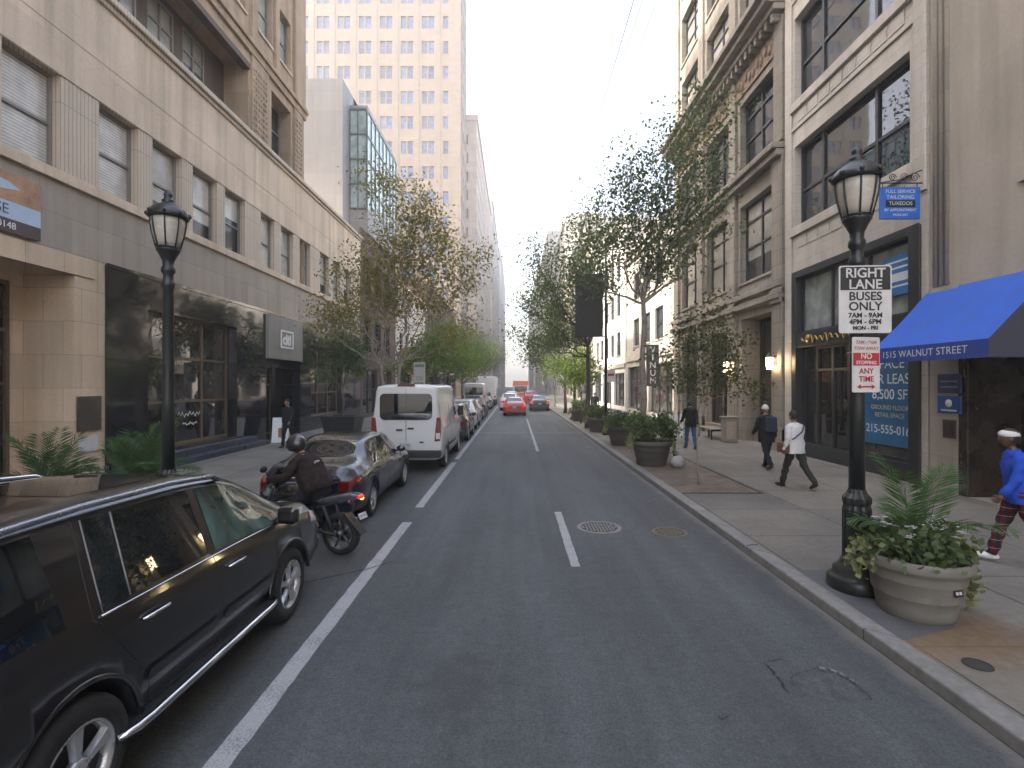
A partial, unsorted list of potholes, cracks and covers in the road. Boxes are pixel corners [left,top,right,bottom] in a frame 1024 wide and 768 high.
crack [763,659,789,693]
manhole cover [652,527,688,537]
manhole cover [961,657,995,672]
